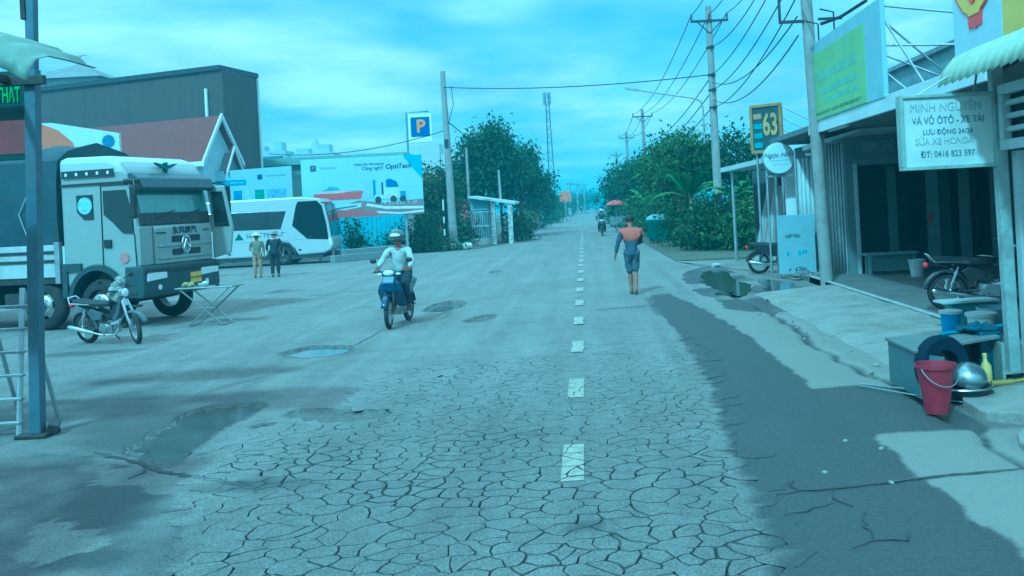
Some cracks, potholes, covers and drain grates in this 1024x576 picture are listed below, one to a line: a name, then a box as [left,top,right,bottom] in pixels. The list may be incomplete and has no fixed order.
crack [95,452,255,486]
crack [174,336,1022,576]
pothole [124,403,266,464]
